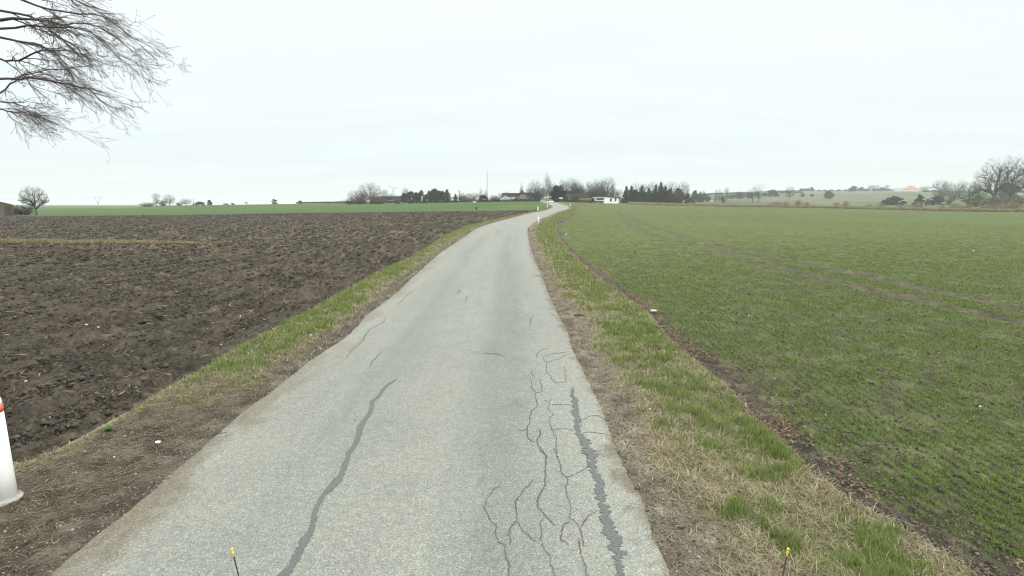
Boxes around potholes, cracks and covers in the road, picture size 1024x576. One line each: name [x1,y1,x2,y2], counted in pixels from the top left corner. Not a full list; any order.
crack [484,349,607,576]
